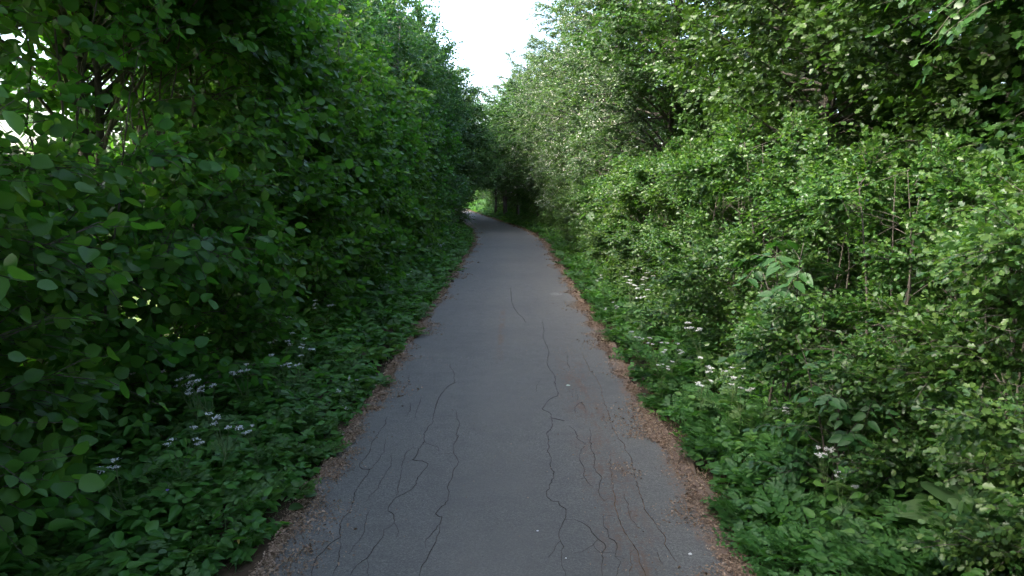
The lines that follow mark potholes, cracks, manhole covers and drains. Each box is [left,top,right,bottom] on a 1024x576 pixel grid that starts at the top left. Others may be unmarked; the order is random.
crack [536,322,677,576]
crack [311,363,460,576]
